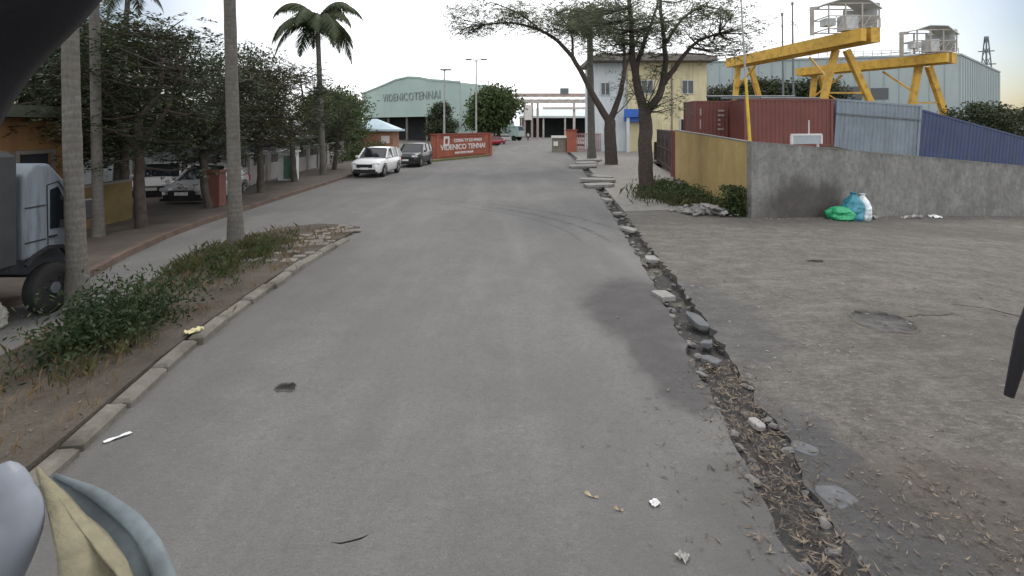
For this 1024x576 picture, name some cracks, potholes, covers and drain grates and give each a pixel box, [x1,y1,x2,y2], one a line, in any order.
pothole [274,382,297,392]
